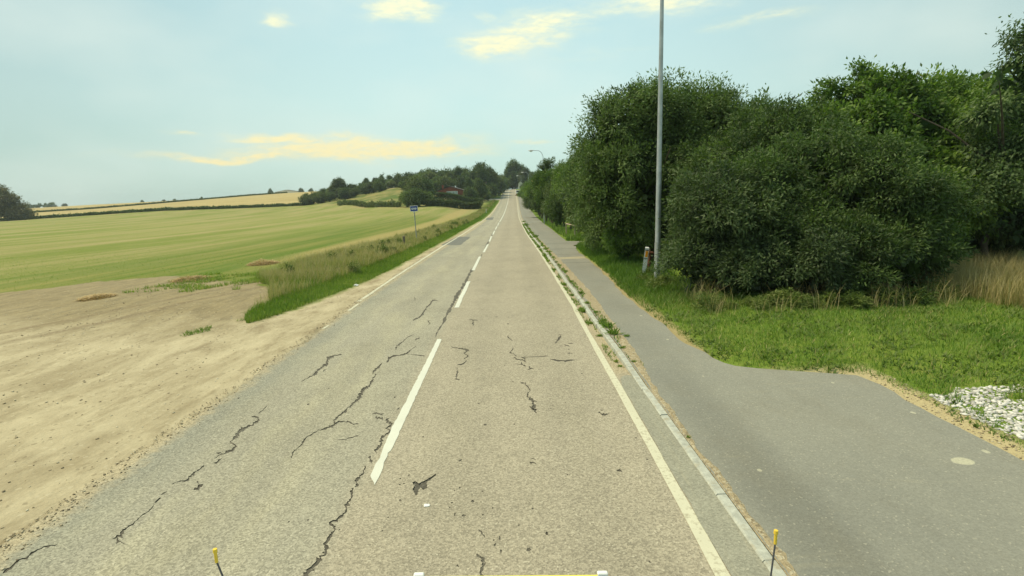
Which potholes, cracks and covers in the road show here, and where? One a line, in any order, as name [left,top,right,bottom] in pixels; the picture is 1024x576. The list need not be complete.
crack [451,346,469,380]
crack [113,406,267,544]
crack [507,336,573,413]
pothole [412,474,436,495]
crack [291,297,437,576]
crack [476,530,486,576]
crack [3,544,57,573]
